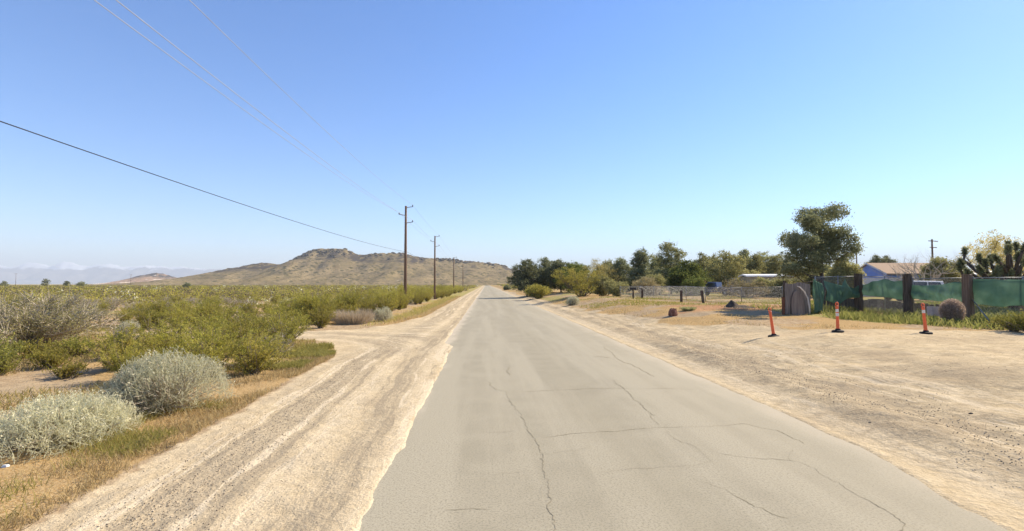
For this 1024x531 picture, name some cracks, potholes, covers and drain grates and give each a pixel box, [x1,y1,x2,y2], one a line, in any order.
crack [472,346,906,531]
